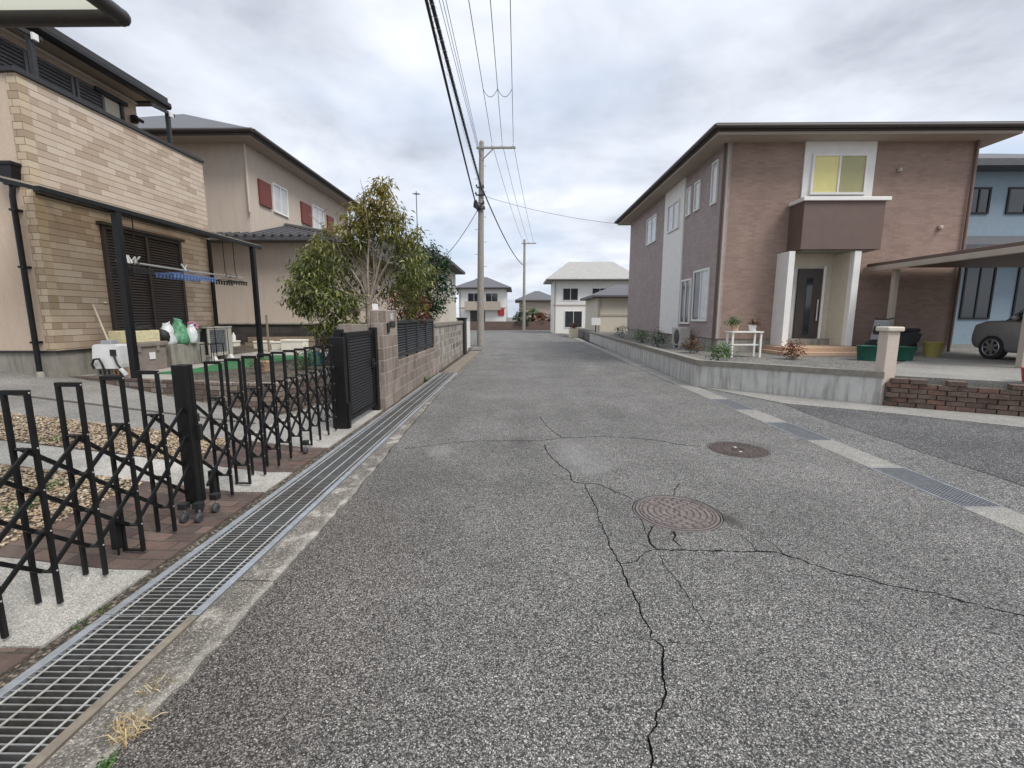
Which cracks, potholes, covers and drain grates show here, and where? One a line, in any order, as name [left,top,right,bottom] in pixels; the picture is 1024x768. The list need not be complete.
drain grate [296,446,379,478]
manhole cover [707,442,770,458]
drain grate [229,476,346,526]
drain grate [366,411,417,426]
drain grate [0,615,198,768]
crack [412,417,1024,768]
drain grate [105,525,295,618]
manhole cover [632,496,724,538]
drain grate [387,399,429,411]
drain grate [415,383,446,391]
drain grate [338,426,401,447]
drain grate [404,391,438,400]
